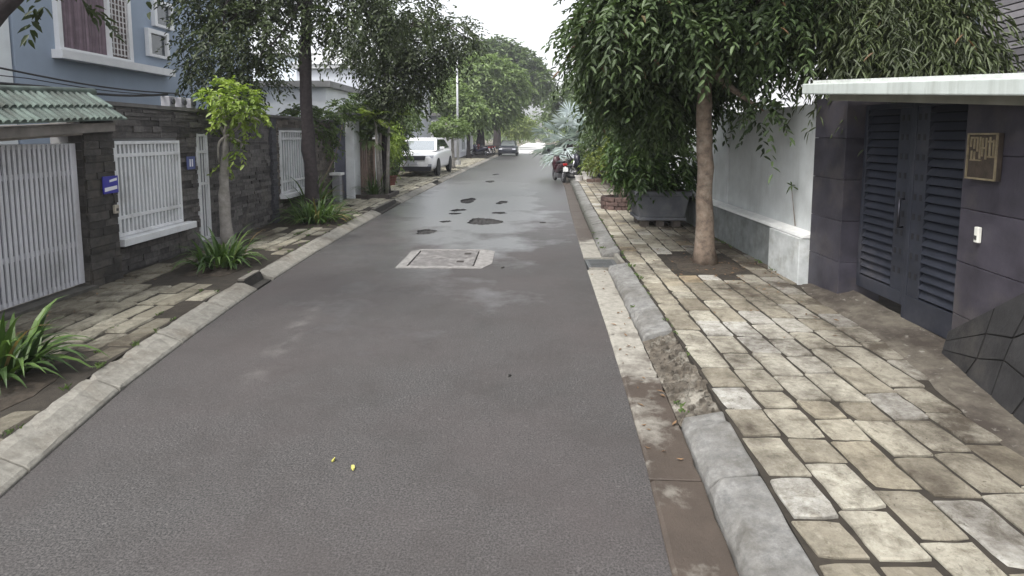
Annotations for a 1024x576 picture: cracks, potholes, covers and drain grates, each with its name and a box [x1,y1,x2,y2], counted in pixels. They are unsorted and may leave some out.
pothole [467,217,503,225]
drain grate [584,253,625,271]
manhole cover [395,249,495,269]
